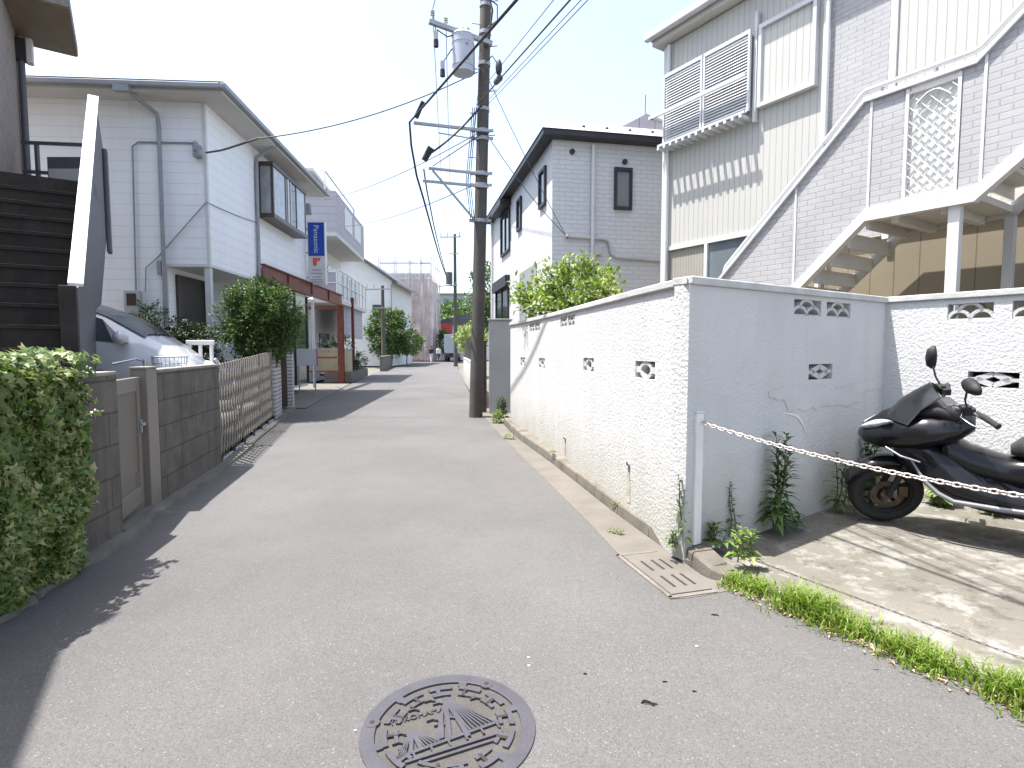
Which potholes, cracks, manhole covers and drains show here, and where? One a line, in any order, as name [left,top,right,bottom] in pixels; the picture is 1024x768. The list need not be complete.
manhole cover [359,675,536,768]
